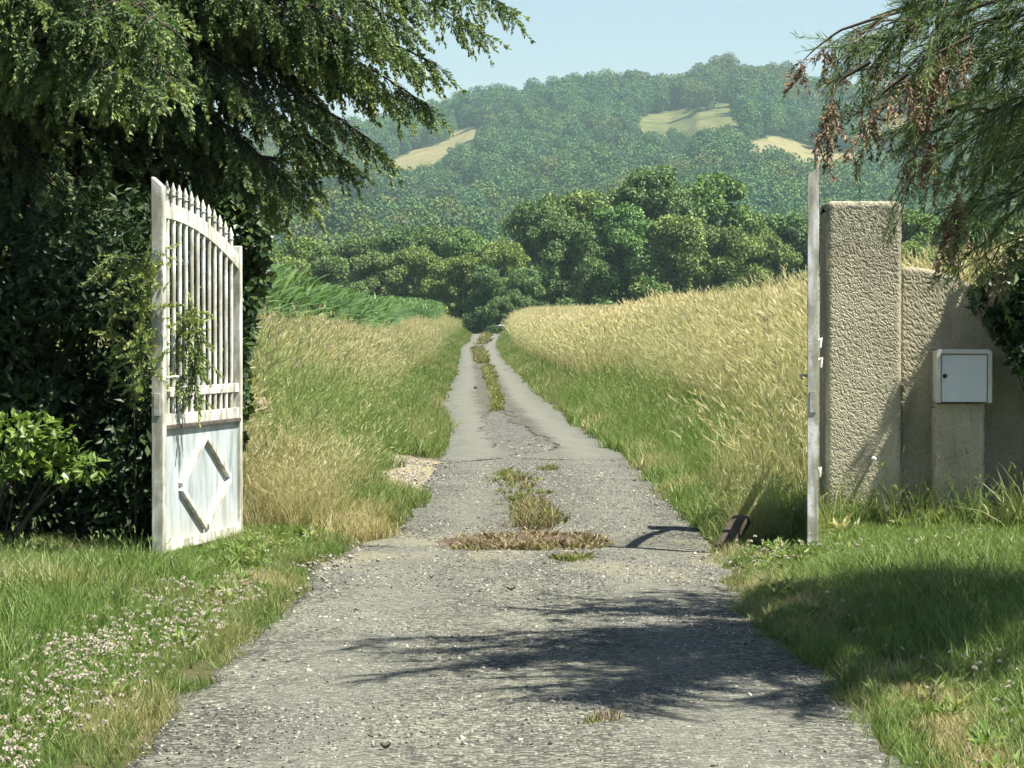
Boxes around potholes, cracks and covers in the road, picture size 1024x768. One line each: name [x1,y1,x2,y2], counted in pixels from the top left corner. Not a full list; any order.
pothole [477,407,560,457]
